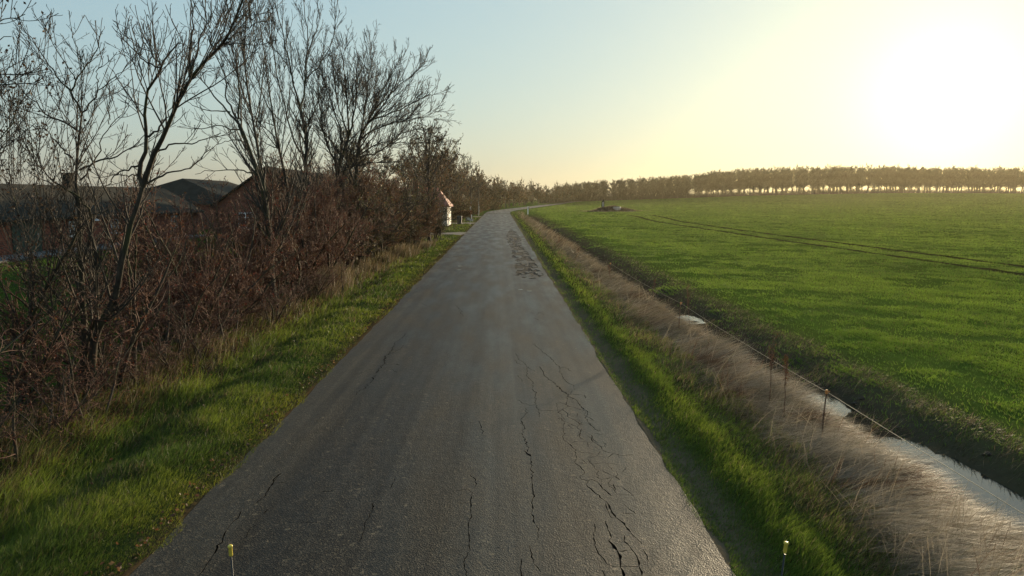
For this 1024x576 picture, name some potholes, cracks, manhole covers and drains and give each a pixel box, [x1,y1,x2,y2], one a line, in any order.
crack [199,474,301,575]
crack [515,345,648,576]
crack [457,422,484,576]
